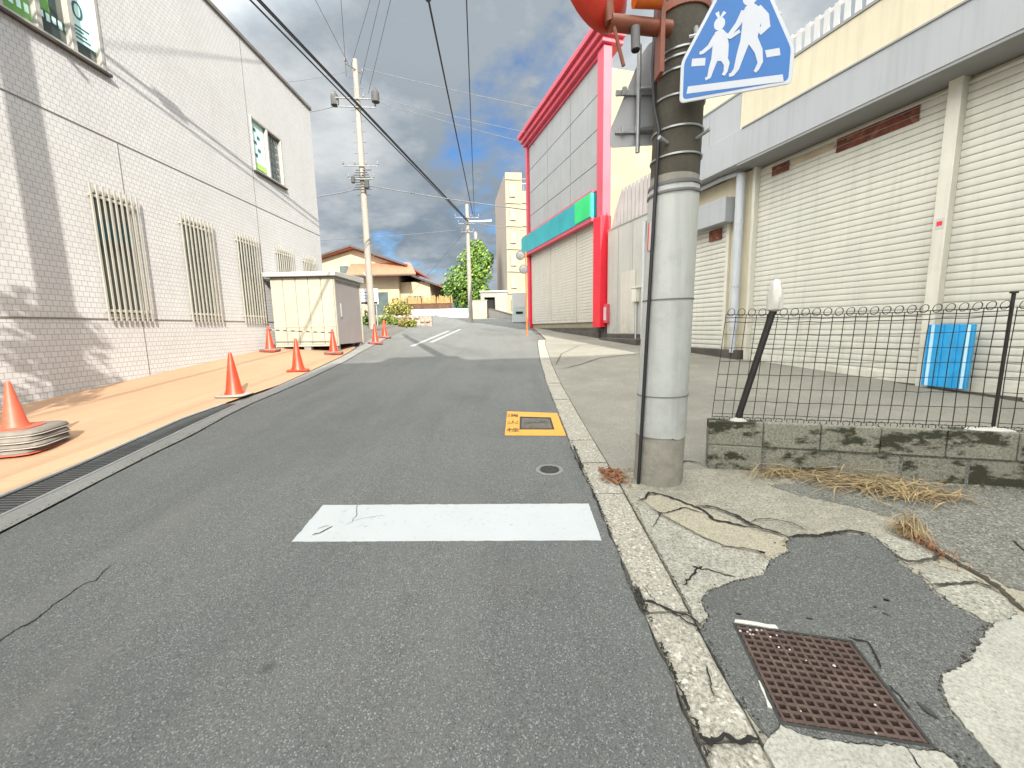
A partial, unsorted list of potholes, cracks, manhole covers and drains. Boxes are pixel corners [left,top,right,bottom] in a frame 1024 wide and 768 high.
crack [0,567,109,641]
crack [891,524,1024,610]
manhole cover [505,411,566,436]
crack [637,491,804,556]
drain grate [732,623,936,748]
manhole cover [536,464,563,476]
crack [698,732,760,747]
crack [849,637,911,710]
